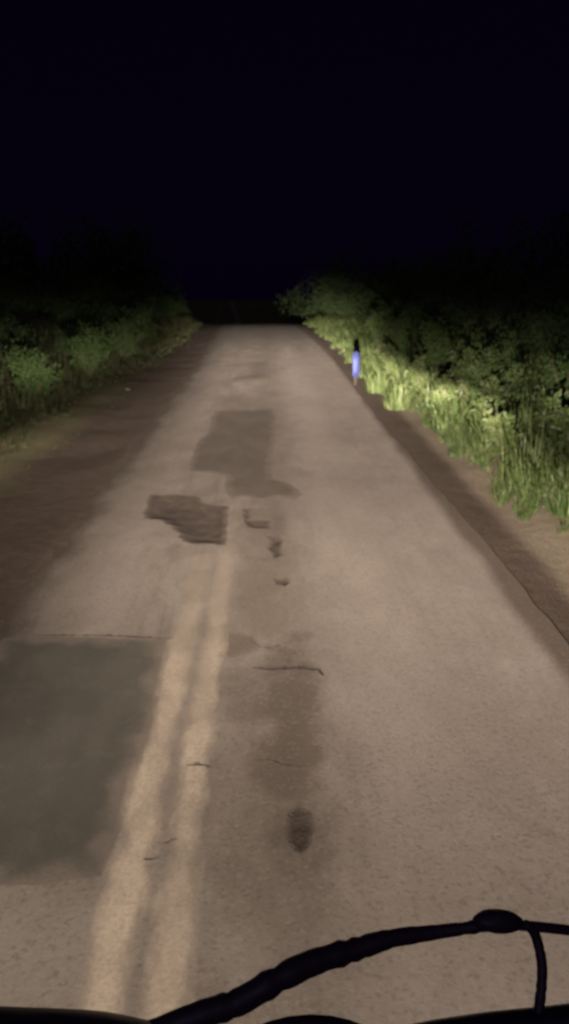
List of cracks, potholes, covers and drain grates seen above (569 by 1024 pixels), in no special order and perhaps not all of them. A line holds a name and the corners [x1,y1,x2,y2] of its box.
pothole [284,805,316,855]
crack [253,665,324,676]
pothole [242,508,272,529]
pothole [265,532,285,558]
pothole [273,577,291,587]
